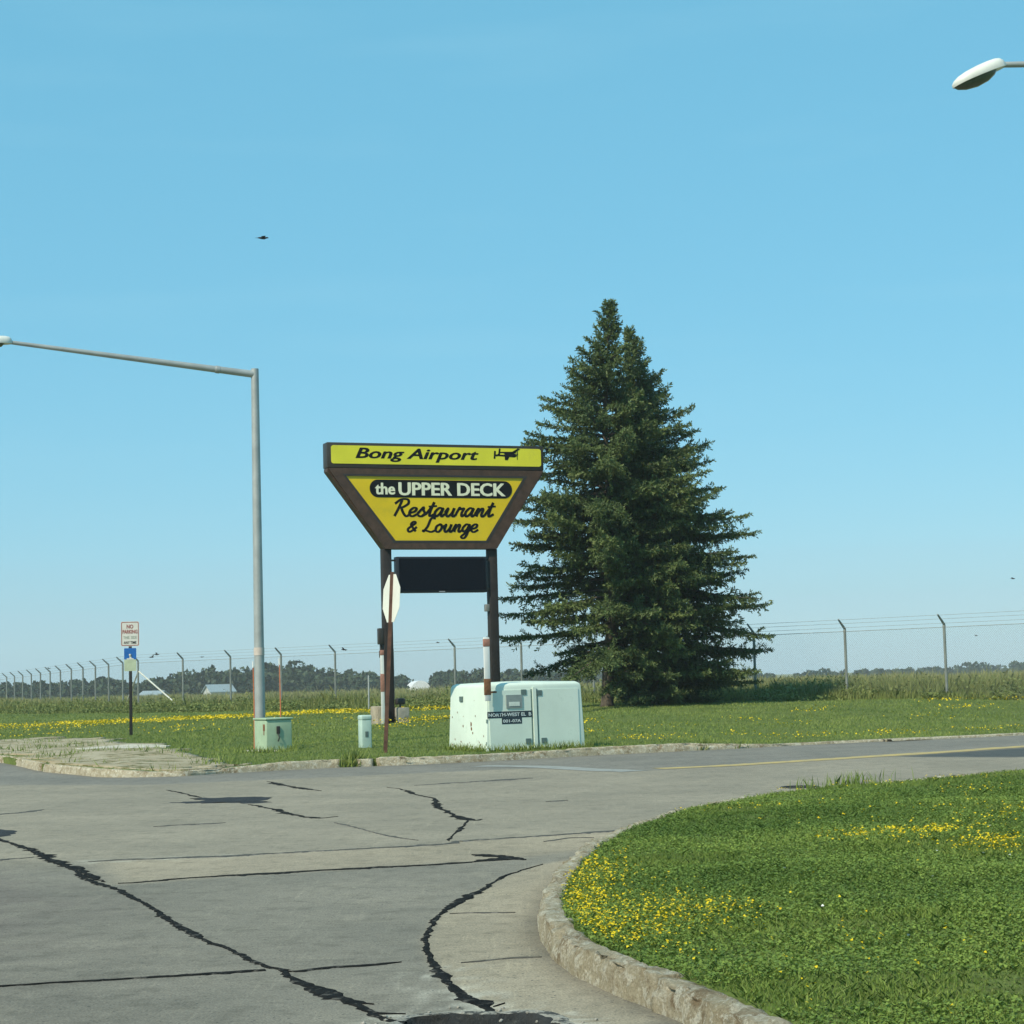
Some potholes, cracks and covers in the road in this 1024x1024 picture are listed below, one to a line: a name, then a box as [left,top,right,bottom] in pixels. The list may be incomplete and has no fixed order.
pothole [361,1006,598,1024]
crack [0,778,615,1023]
